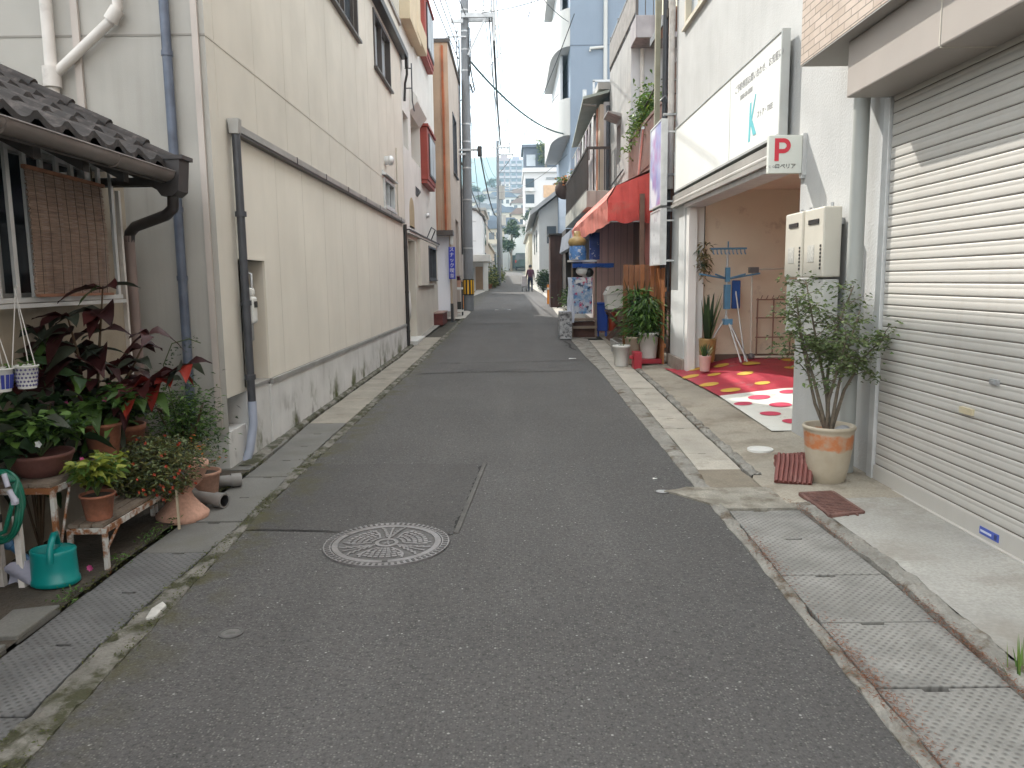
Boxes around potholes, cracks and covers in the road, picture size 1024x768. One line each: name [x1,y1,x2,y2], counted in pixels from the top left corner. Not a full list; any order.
utility cover [218,627,244,639]
manhole cover [323,522,449,568]
